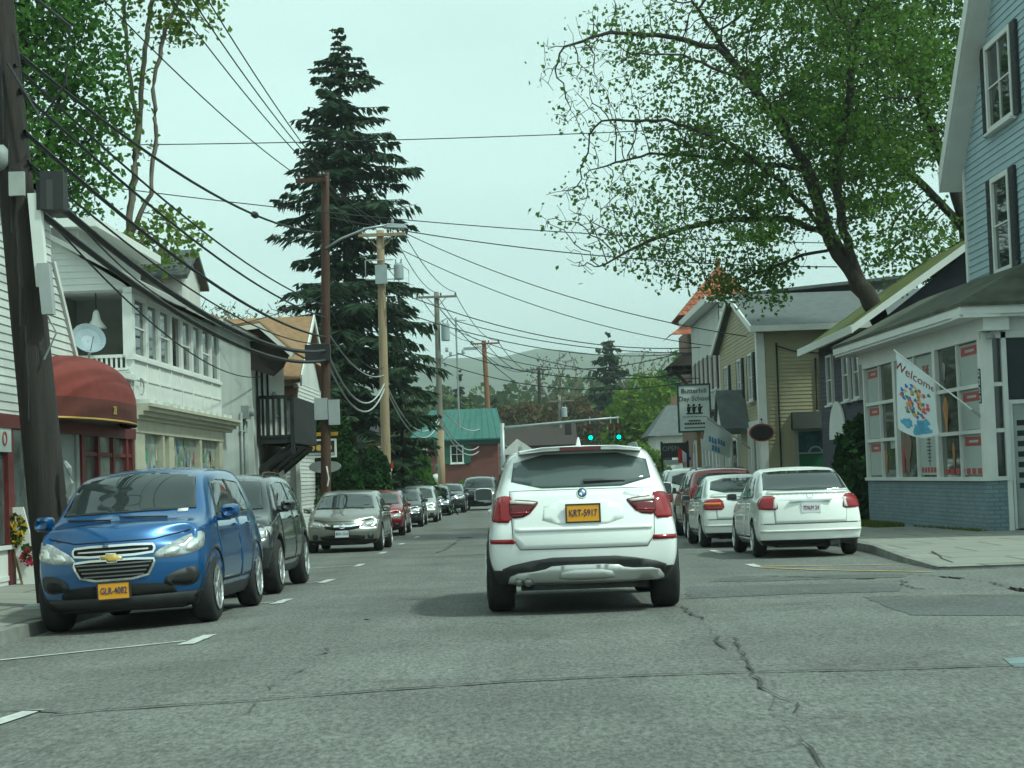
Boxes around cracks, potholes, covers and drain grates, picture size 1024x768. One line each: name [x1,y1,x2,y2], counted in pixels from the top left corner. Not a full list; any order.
crack [681,606,857,768]
